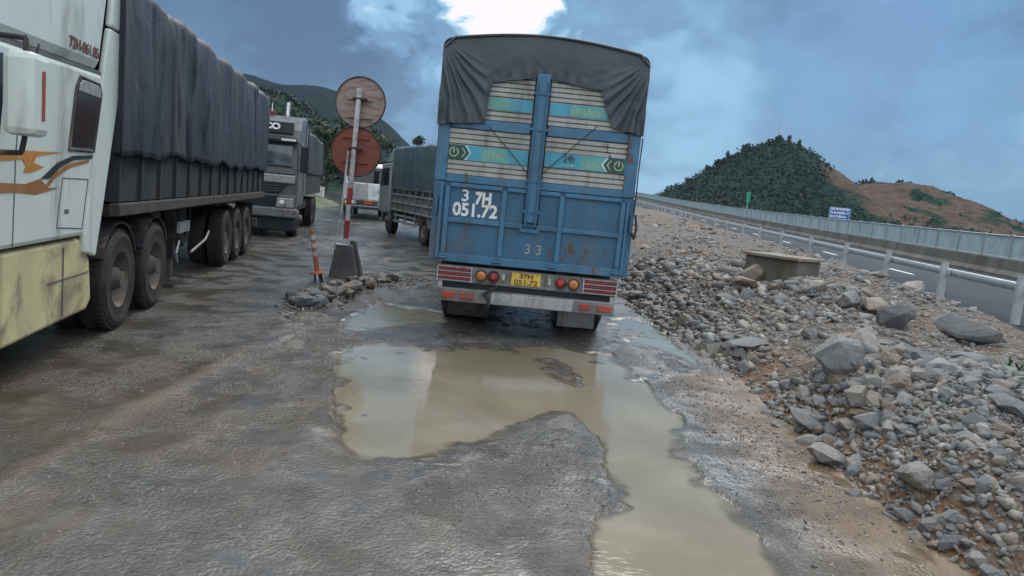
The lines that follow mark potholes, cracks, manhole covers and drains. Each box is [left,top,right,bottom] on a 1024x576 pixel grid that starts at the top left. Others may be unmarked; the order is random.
pothole [271,333,319,352]
pothole [322,339,798,576]
pothole [336,300,451,331]
